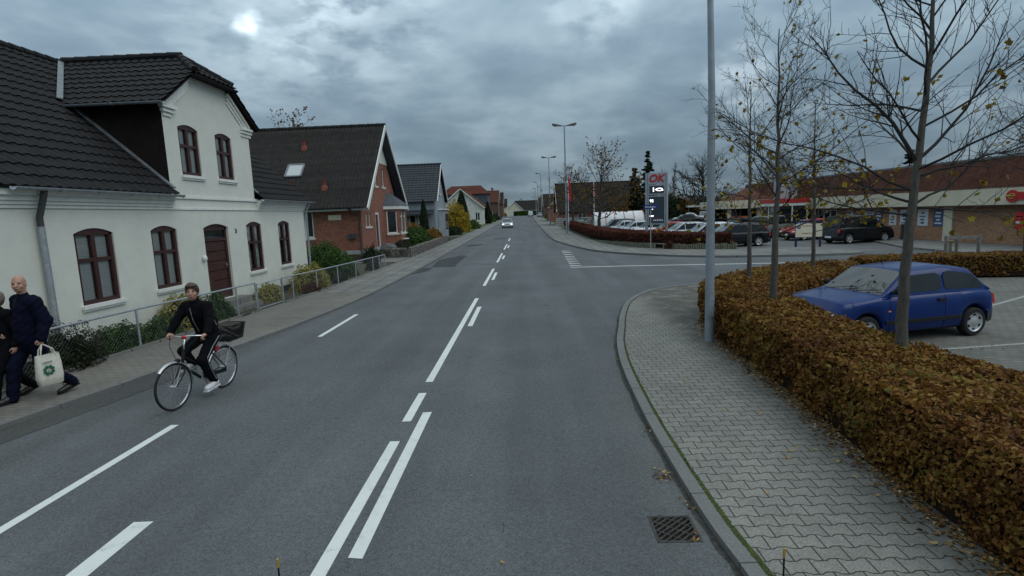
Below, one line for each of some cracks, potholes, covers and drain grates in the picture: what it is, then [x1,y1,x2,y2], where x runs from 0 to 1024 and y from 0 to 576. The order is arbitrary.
drain grate [647,515,703,543]
